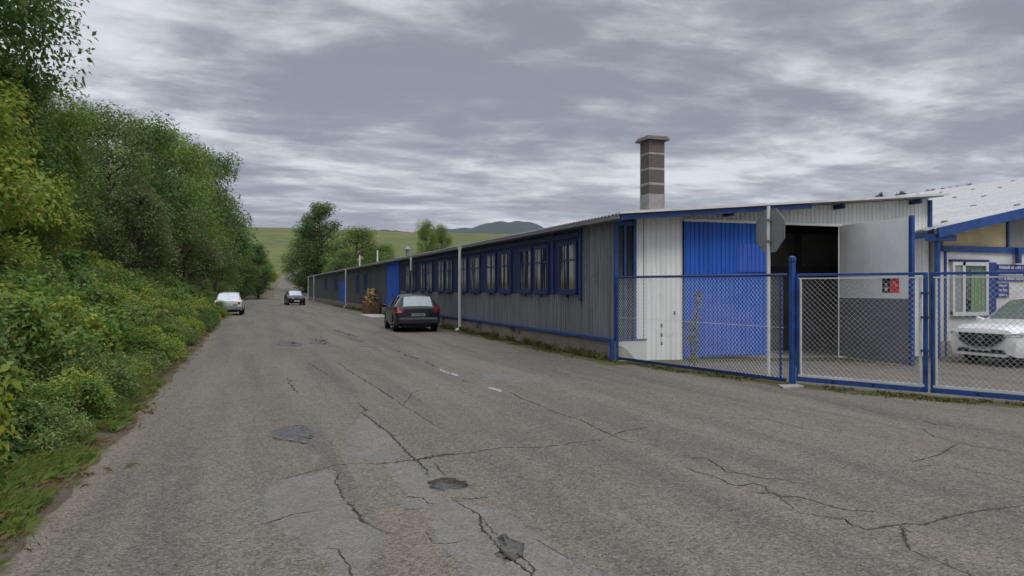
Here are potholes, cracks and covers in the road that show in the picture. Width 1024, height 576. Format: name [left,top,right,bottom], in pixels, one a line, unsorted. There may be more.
pothole [428,478,468,491]
pothole [494,533,525,562]
crack [276,362,603,534]
pothole [271,425,315,441]
crack [681,457,1021,576]
crack [426,485,574,576]
crack [801,395,1018,482]
crack [327,547,353,576]
